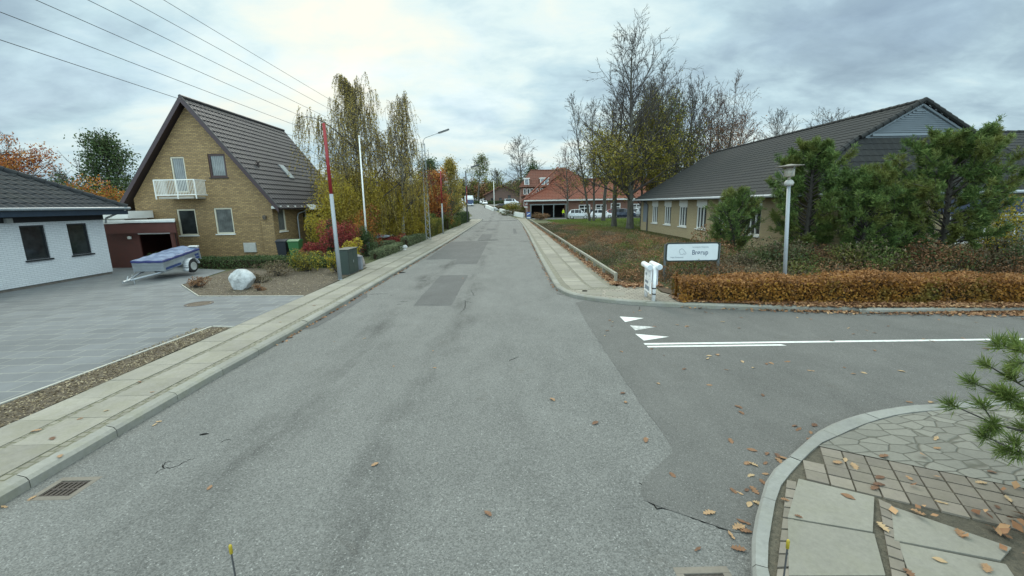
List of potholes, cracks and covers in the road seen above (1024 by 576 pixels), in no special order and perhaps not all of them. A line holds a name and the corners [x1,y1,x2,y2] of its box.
crack [640,483,730,531]
drain grate [25,476,103,501]
